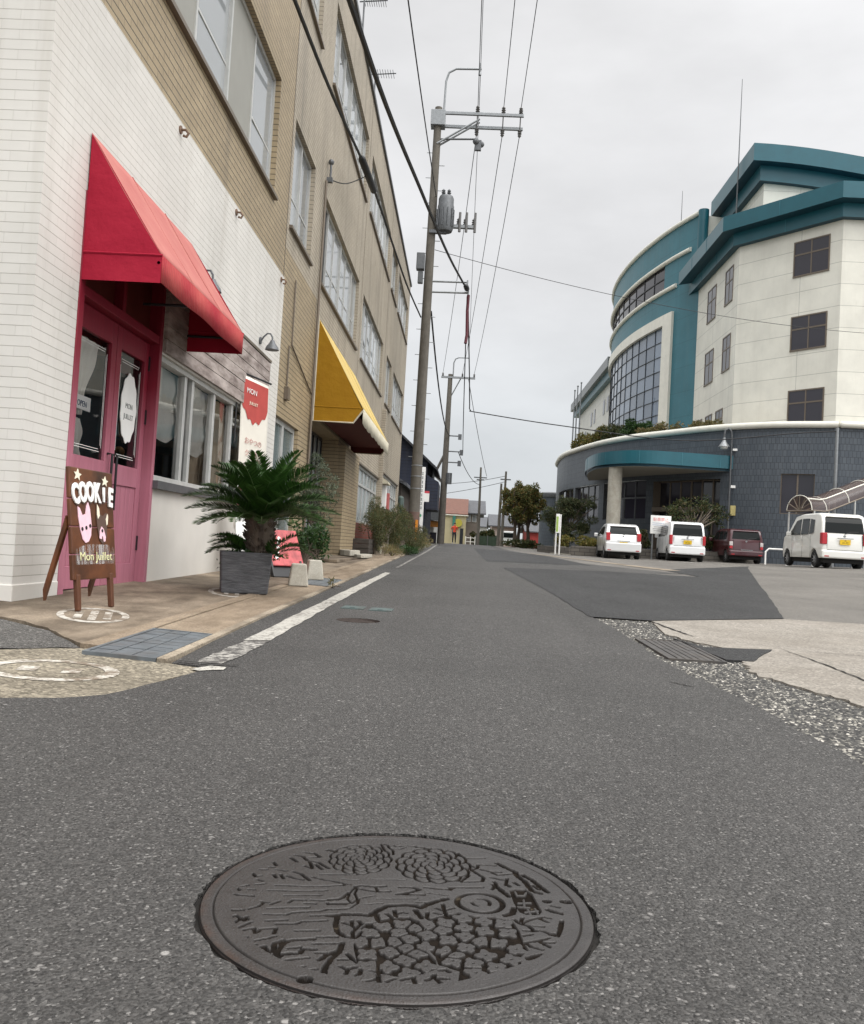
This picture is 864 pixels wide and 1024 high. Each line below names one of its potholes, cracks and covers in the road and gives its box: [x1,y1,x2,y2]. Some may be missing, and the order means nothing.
manhole cover [194,836,599,1010]
drain grate [635,638,727,664]
